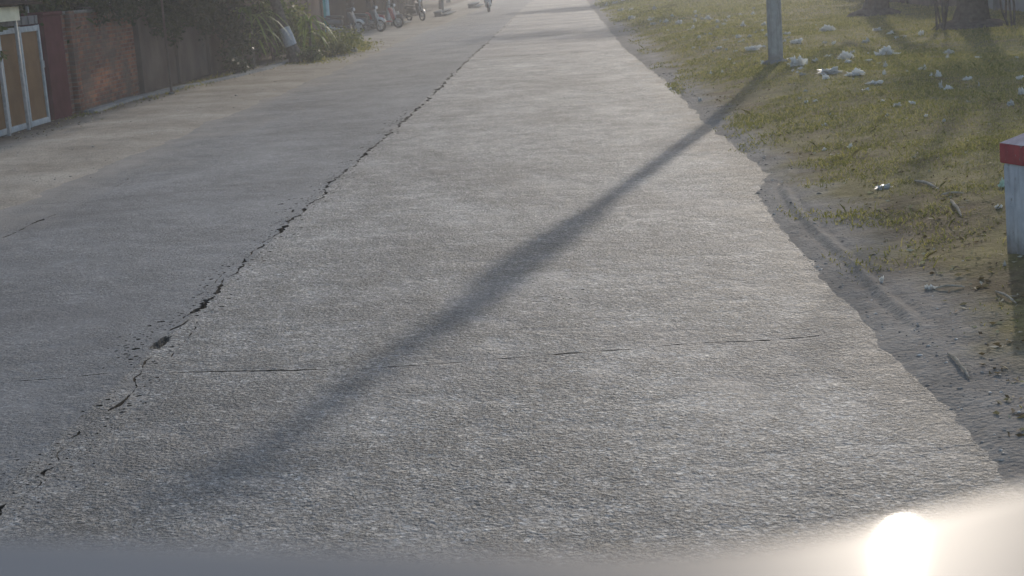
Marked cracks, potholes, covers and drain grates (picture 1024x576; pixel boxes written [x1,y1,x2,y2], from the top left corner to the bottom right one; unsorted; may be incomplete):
pothole [149,336,172,350]
crack [176,335,821,373]
crack [0,21,511,521]
